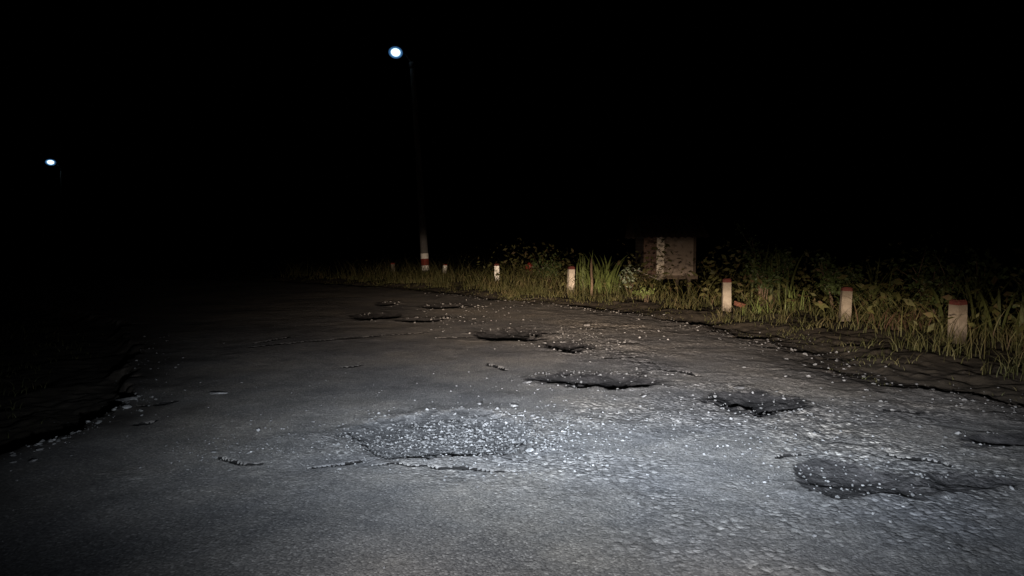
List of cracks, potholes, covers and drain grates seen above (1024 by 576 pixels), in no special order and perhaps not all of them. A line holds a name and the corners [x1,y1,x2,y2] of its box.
pothole [793,458,945,501]
pothole [540,341,597,354]
crack [218,457,264,466]
pothole [959,431,1024,447]
pothole [350,313,402,321]
pothole [917,470,1020,493]
crack [604,356,701,377]
pothole [332,407,540,460]
pothole [468,328,548,342]
pothole [525,372,659,390]
crack [252,332,429,347]
pothole [700,390,813,417]
